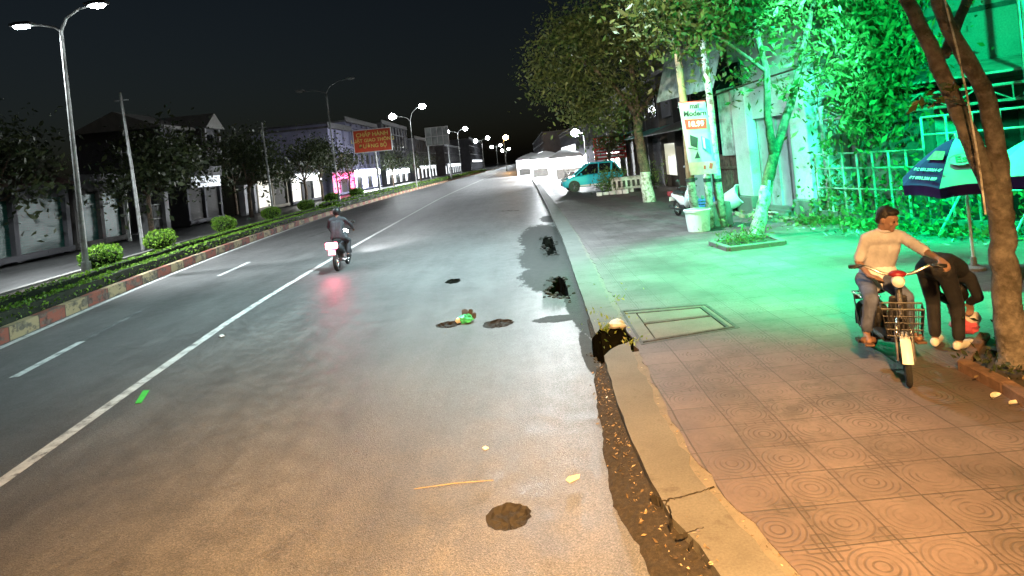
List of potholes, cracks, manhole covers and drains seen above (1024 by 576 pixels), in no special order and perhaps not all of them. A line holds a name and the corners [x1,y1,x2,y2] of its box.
pothole [543,276,576,303]
pothole [486,502,532,531]
pothole [539,236,560,257]
pothole [483,319,513,328]
manhole cover [620,304,740,345]
crack [650,486,715,551]
